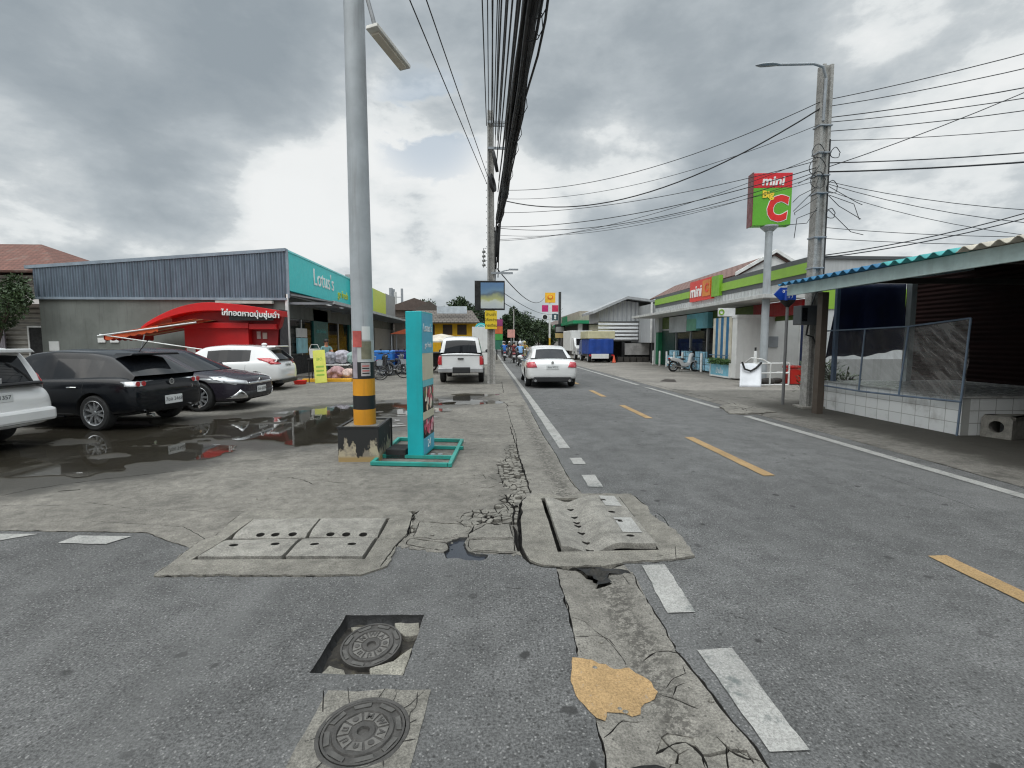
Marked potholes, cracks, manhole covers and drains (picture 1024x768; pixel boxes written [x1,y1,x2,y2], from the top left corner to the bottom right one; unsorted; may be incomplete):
manhole cover [319,700,405,767]
manhole cover [340,623,402,672]
pothole [444,538,488,561]
crack [165,385,769,768]
pothole [577,567,630,585]
